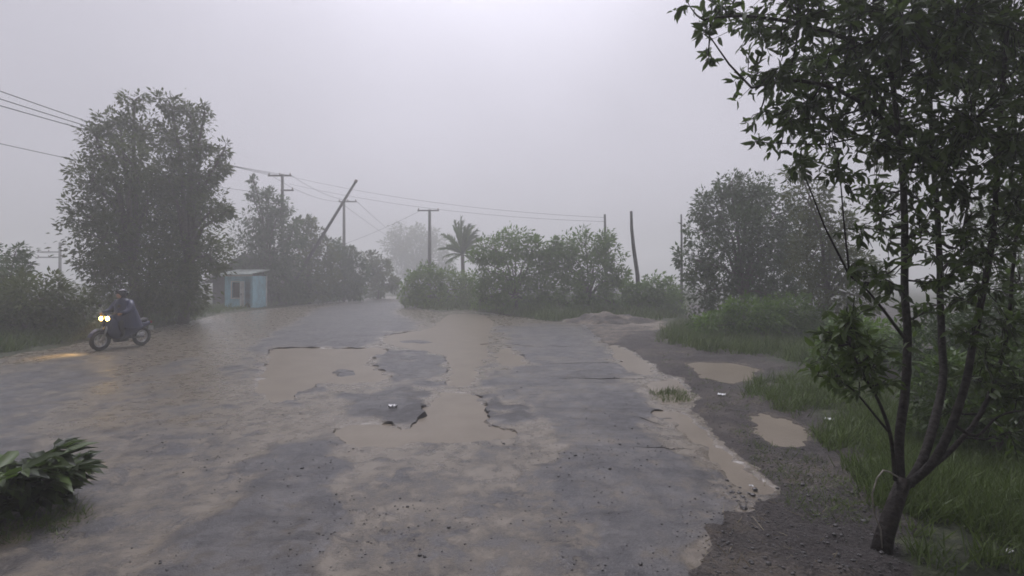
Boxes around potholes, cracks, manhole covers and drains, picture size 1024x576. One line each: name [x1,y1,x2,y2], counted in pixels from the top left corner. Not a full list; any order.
pothole [248,346,393,404]
crack [491,343,655,379]
pothole [651,409,781,501]
pothole [333,390,522,449]
